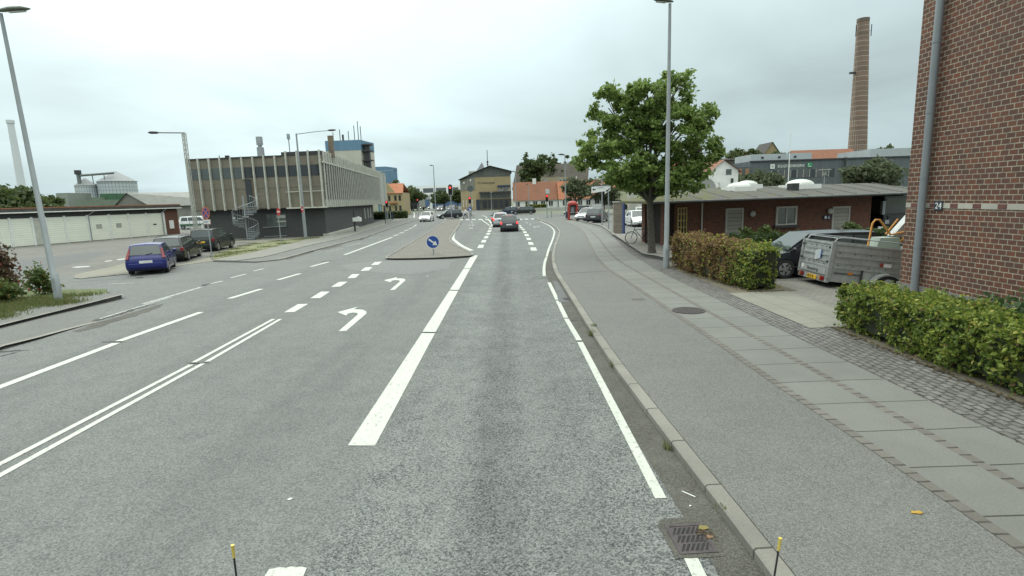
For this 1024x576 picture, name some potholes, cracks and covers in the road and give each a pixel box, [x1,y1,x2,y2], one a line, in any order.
drain grate [664,523,719,555]
